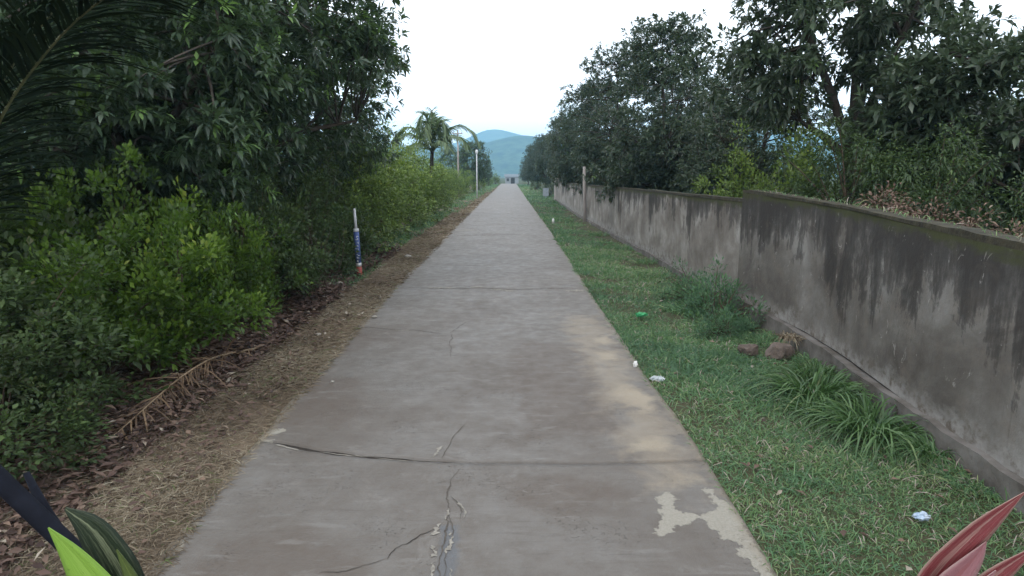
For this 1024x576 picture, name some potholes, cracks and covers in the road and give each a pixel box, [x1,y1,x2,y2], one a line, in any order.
crack [276,425,467,576]
crack [364,322,466,354]
